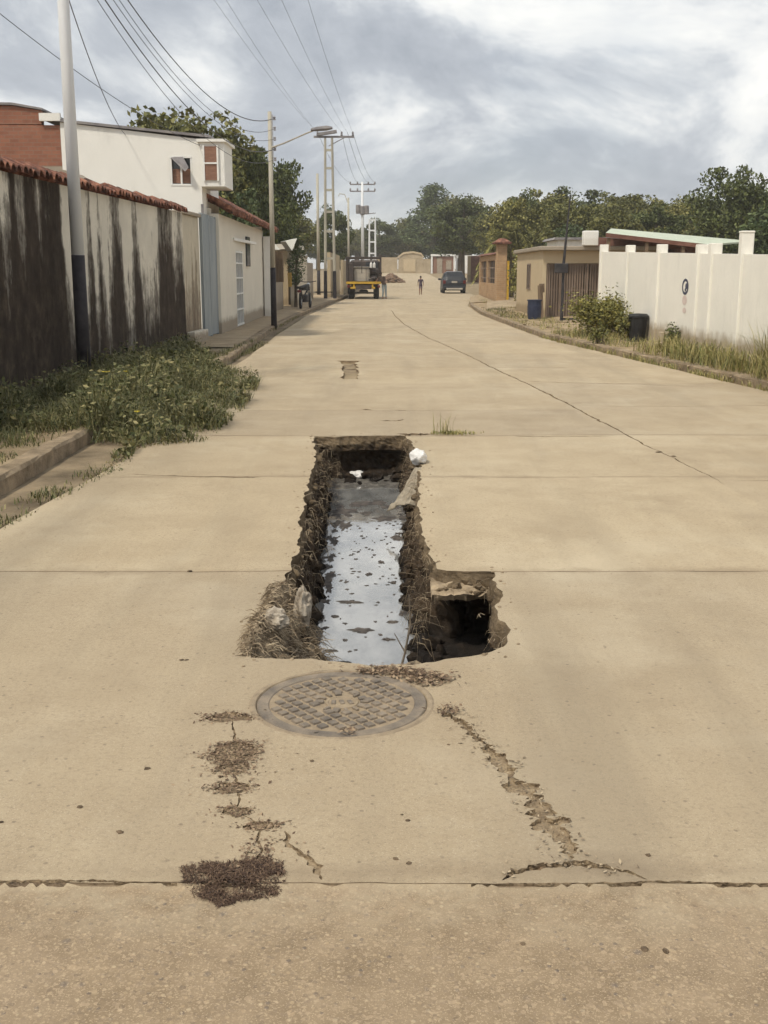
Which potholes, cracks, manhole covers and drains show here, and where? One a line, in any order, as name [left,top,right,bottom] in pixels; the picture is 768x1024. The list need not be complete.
crack [363,409,436,436]
pothole [251,435,511,672]
manhole cover [249,670,434,740]
crack [441,710,768,888]
crack [205,712,323,880]
crack [391,310,723,484]
